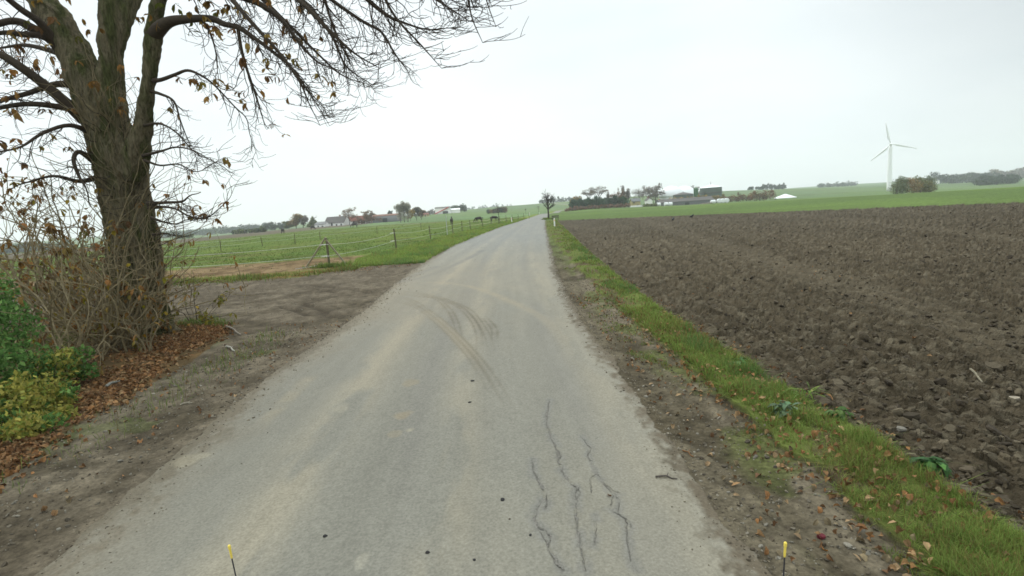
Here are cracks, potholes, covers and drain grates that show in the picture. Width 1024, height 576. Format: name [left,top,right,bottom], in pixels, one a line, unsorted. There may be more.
crack [531,403,631,571]
